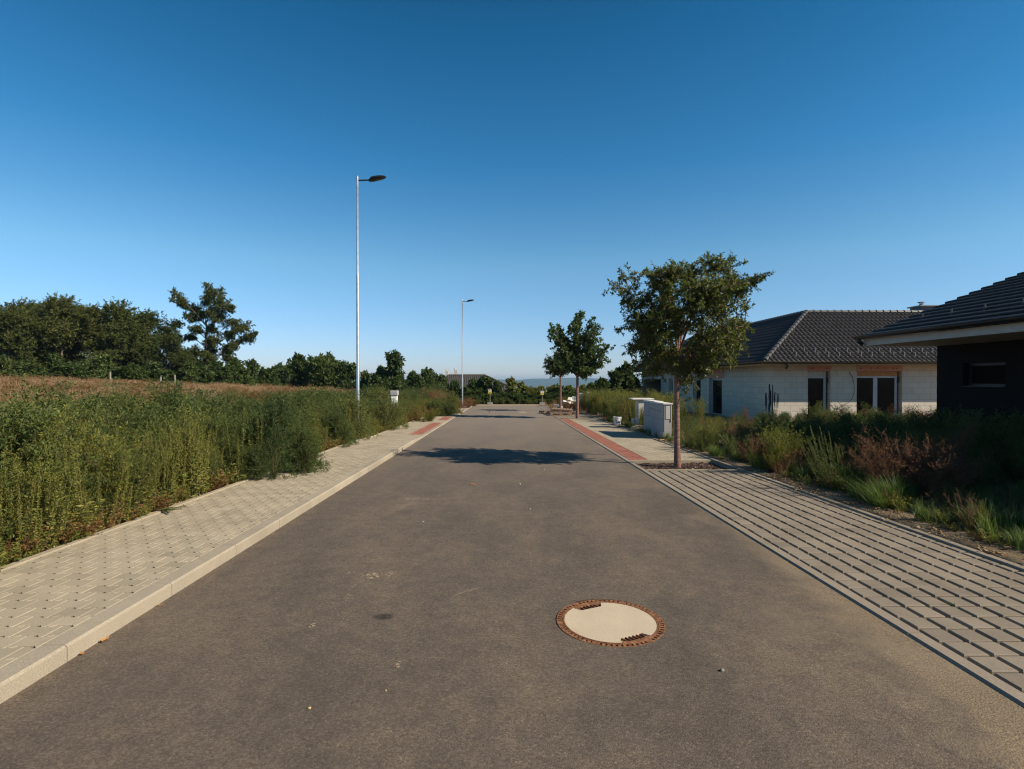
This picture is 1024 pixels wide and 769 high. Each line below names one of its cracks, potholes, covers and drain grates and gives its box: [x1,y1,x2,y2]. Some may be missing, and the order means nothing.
manhole cover [557,599,665,647]
